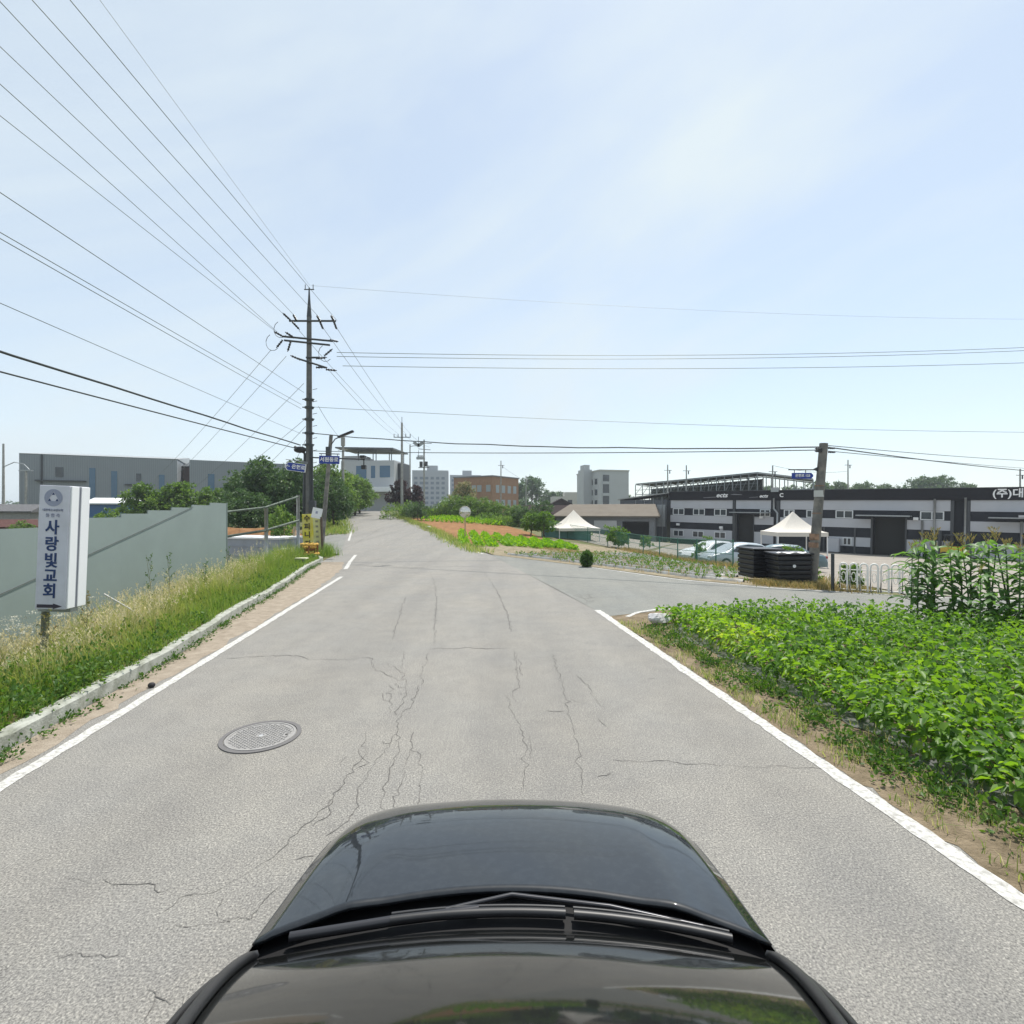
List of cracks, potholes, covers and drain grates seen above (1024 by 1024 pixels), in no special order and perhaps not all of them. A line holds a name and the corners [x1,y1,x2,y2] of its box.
manhole cover [218,720,302,754]
crack [68,653,428,927]
crack [600,760,839,776]
crack [508,653,532,791]
crack [553,658,606,794]
